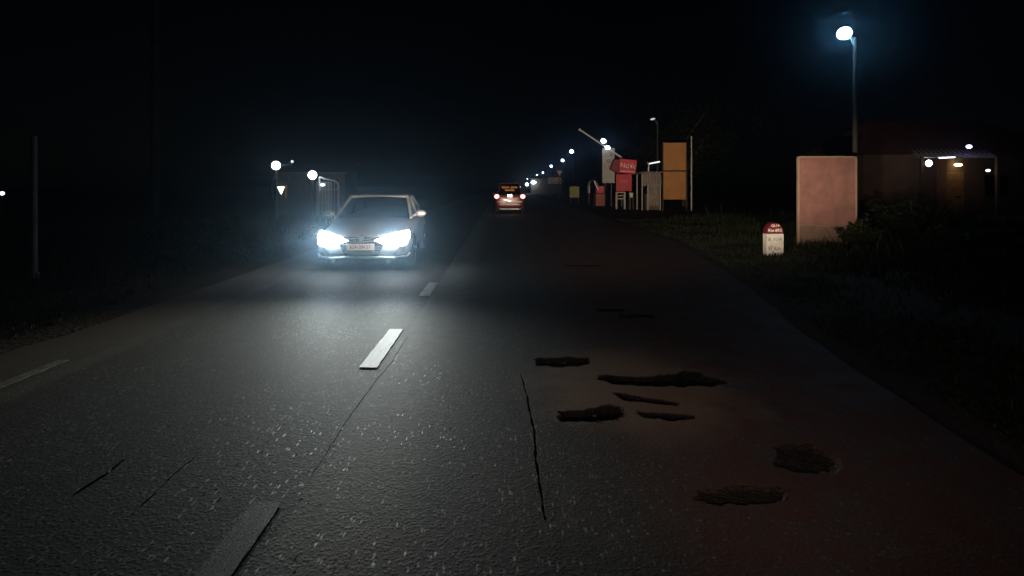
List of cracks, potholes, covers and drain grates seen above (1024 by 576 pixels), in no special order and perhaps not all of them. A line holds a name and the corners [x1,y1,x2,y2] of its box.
crack [520,374,547,520]
pothole [771,443,844,475]
pothole [557,404,627,422]
crack [71,458,194,518]
pothole [533,356,591,367]
pothole [612,392,680,406]
pothole [634,410,697,421]
pothole [596,370,728,387]
pothole [693,484,794,506]
